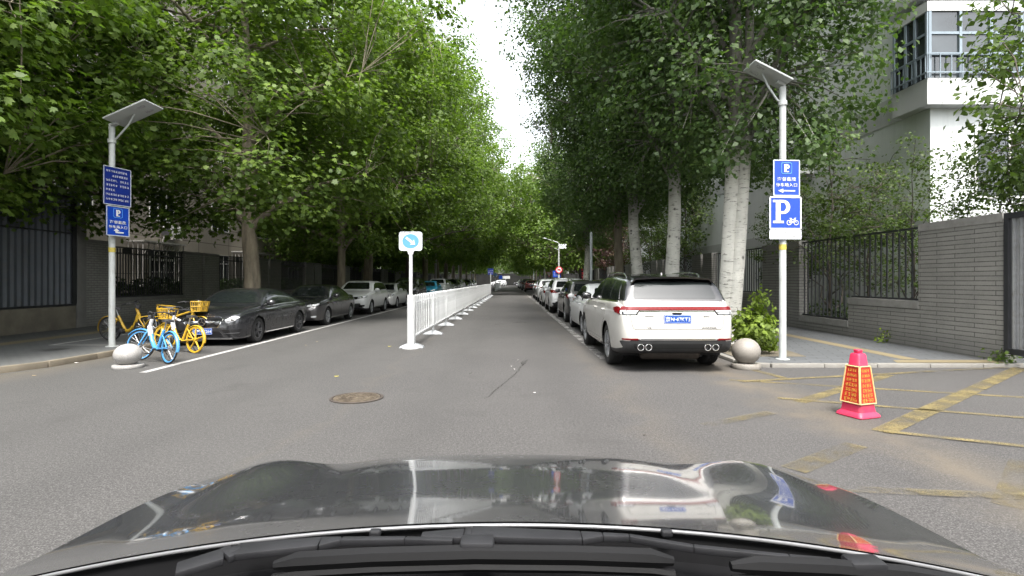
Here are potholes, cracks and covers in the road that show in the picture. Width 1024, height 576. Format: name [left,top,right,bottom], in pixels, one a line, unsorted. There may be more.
manhole cover [329,392,384,404]
